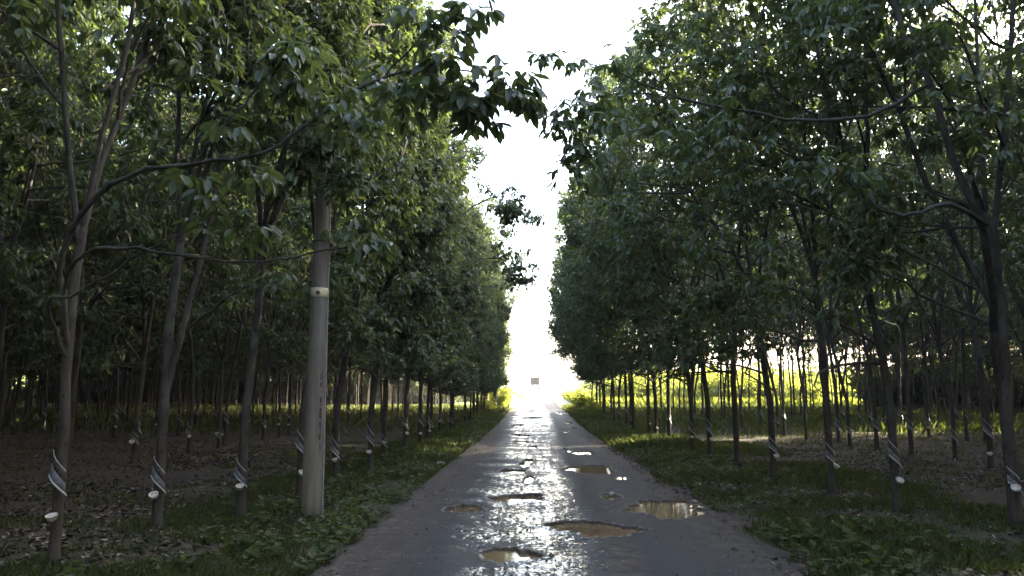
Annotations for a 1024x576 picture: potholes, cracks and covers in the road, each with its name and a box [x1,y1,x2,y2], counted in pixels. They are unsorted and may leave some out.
pothole [595,492,628,501]
pothole [614,498,719,521]
pothole [556,464,620,475]
pothole [435,503,494,514]
pothole [535,518,659,539]
pothole [479,492,550,506]
pothole [468,545,554,566]
pothole [515,458,535,469]
